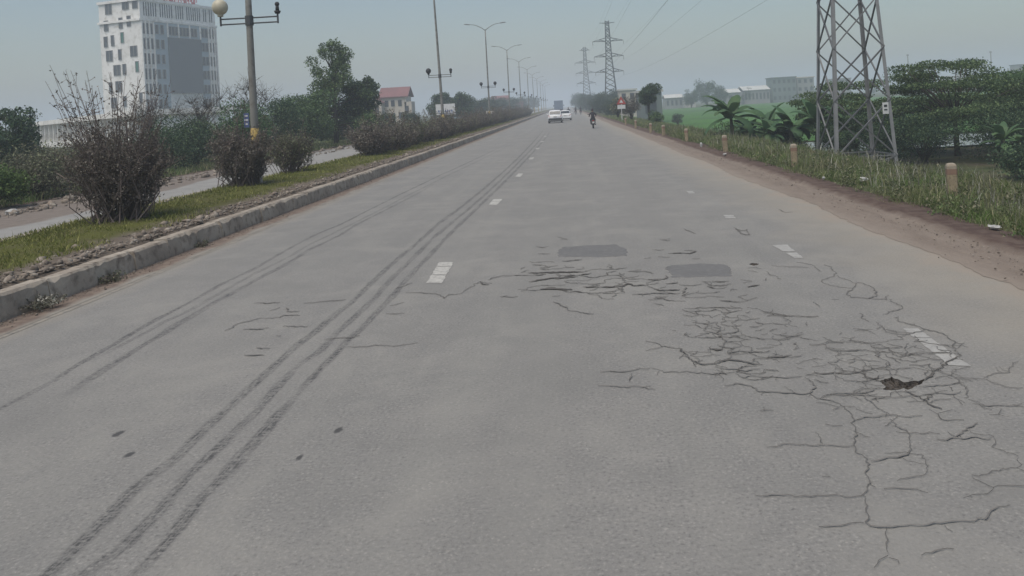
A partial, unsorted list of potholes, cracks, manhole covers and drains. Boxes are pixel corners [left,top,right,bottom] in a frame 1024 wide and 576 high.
crack [480,229,766,314]
crack [227,299,346,355]
crack [599,262,1024,567]
crack [387,281,486,314]
pothole [881,377,924,390]
